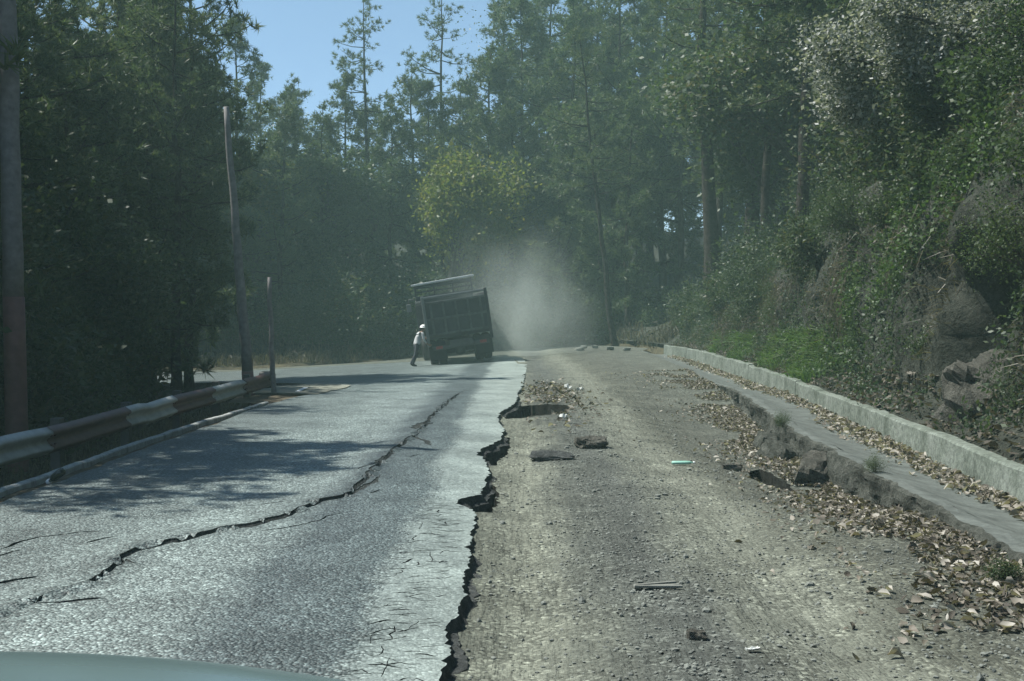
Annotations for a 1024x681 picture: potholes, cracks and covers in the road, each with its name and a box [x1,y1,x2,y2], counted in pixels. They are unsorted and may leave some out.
crack [0,392,460,618]
pothole [501,404,570,419]
crack [335,503,466,681]
